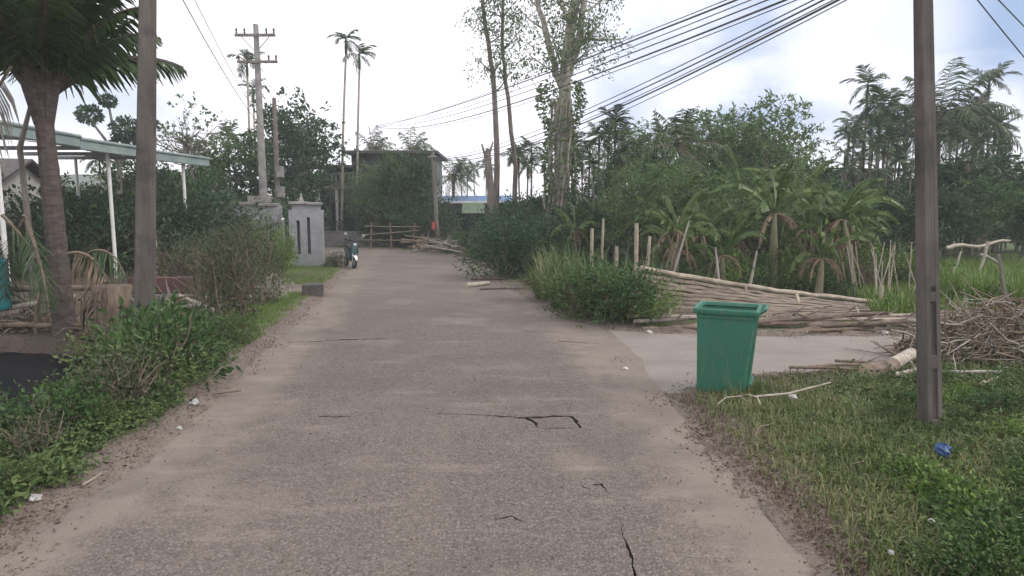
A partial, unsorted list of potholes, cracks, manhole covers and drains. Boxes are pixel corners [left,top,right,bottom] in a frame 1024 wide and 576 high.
crack [621,524,636,576]
crack [467,414,582,428]
